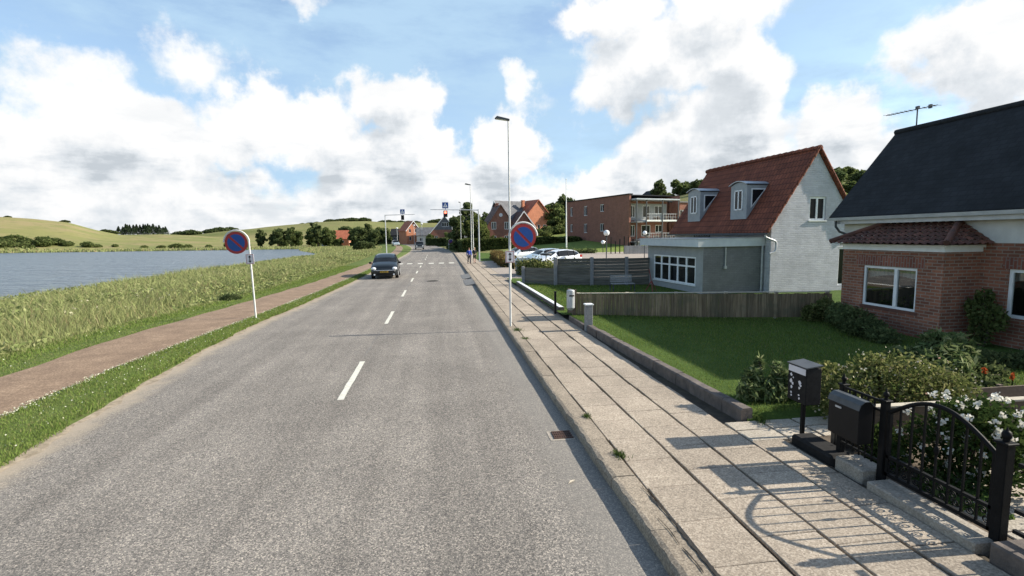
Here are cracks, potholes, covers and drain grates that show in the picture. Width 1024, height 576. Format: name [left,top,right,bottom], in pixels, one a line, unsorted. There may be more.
drain grate [546,430,575,441]
